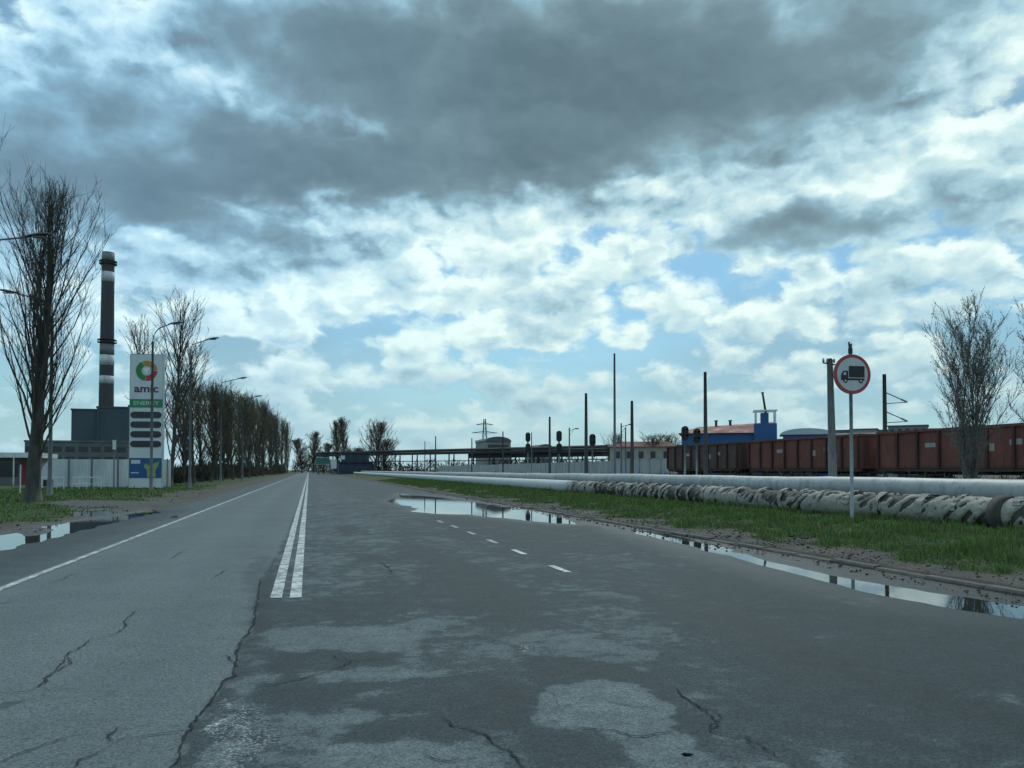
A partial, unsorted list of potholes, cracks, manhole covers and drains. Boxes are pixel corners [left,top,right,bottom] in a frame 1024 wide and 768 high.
crack [0,611,135,693]
crack [673,686,777,757]
crack [438,715,525,768]
crack [0,723,182,768]
